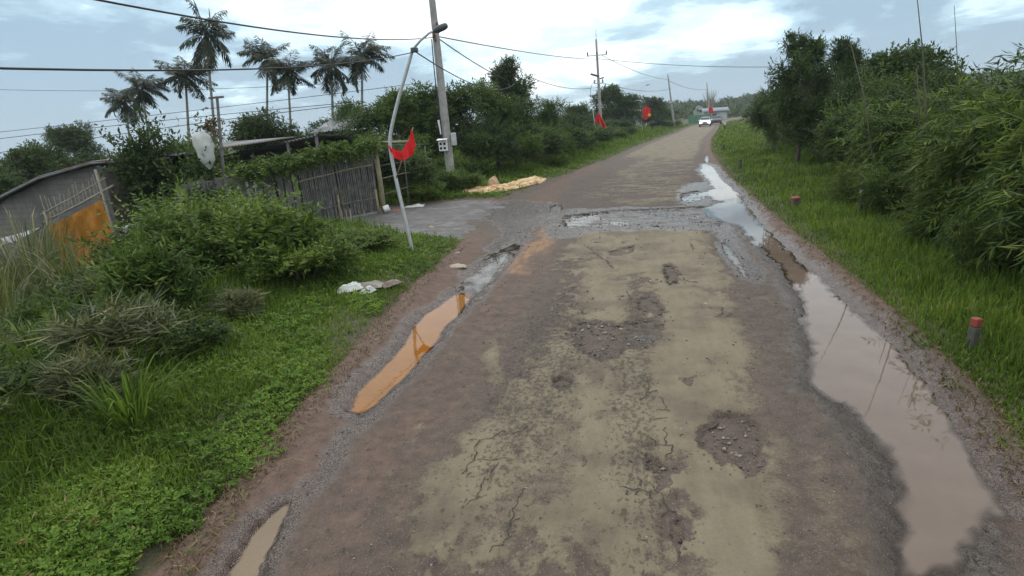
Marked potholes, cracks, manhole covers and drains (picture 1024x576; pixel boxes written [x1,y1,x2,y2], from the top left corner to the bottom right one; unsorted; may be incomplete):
pothole [660,263,684,286]
crack [619,379,684,521]
pothole [633,295,669,319]
pothole [335,289,480,420]
pothole [691,410,775,477]
pothole [566,317,666,362]
pothole [679,191,707,203]
pothole [212,497,298,576]
crack [462,425,528,552]
pothole [558,206,726,229]
